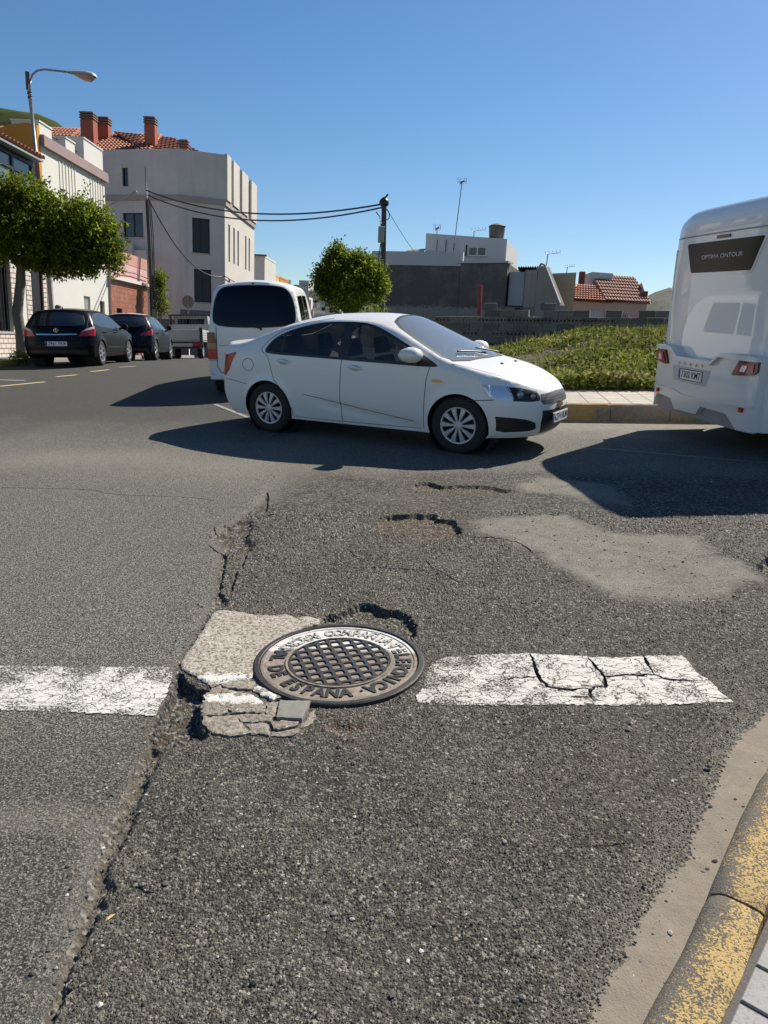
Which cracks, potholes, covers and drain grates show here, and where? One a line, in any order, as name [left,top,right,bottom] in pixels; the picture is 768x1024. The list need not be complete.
pothole [411,482,511,495]
manhole cover [253,624,424,708]
pothole [319,602,418,638]
pothole [377,514,462,542]
crack [256,493,277,520]
crack [504,653,728,702]
